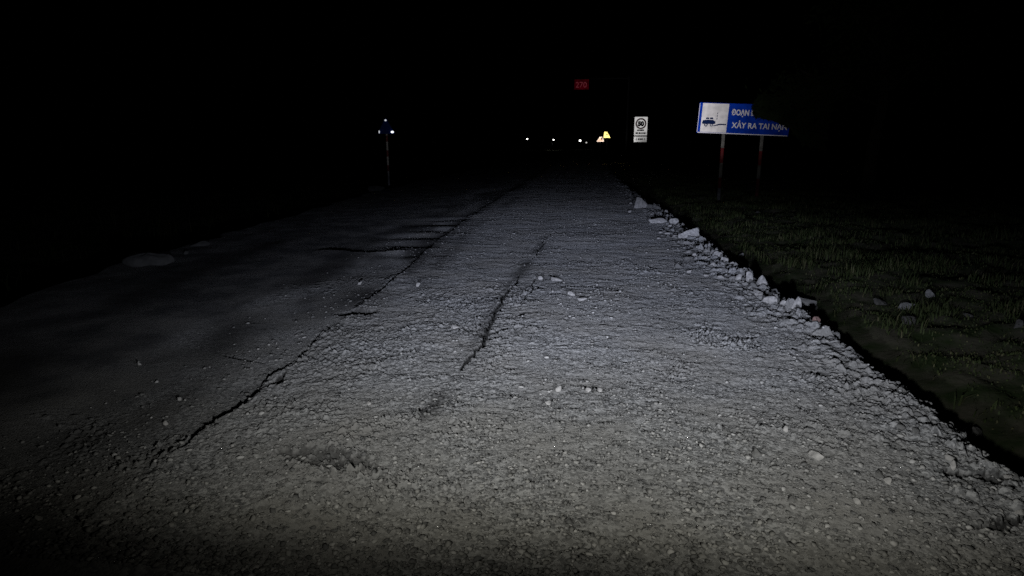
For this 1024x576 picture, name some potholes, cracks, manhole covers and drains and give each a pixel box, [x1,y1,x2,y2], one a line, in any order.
crack [170,199,499,453]
pothole [272,441,380,472]
crack [459,223,563,371]
